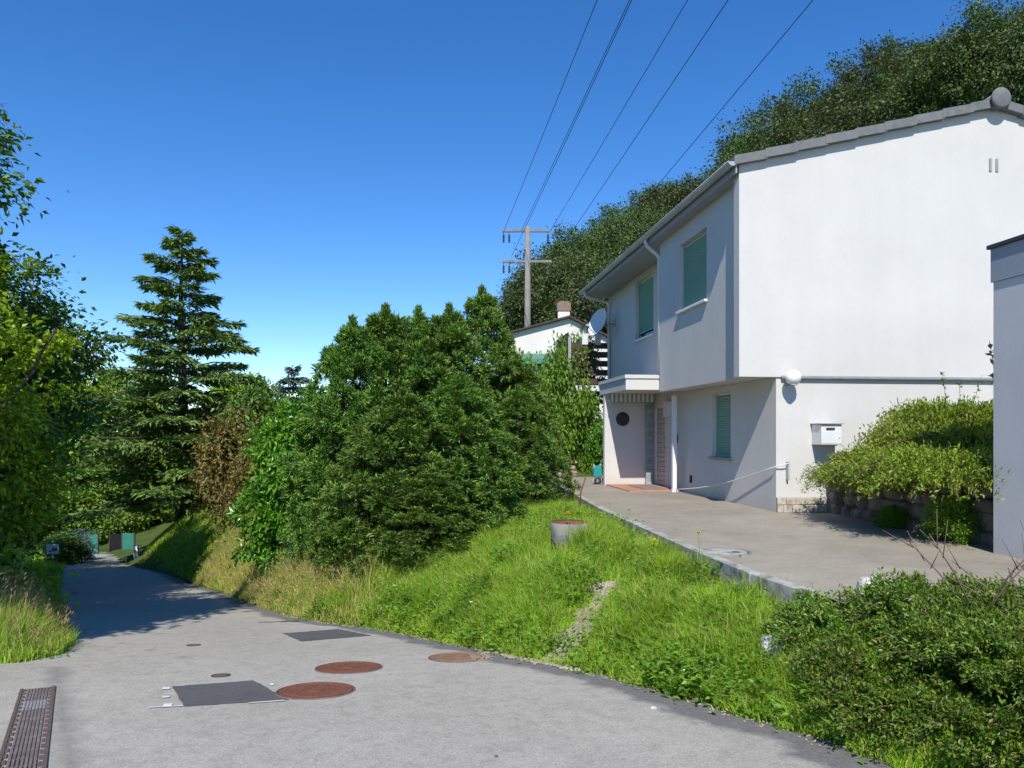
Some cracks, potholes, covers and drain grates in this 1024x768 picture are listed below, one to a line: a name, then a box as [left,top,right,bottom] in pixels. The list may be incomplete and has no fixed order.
manhole cover [315,661,383,674]
manhole cover [702,548,753,557]
manhole cover [275,682,356,700]
manhole cover [428,652,486,663]
